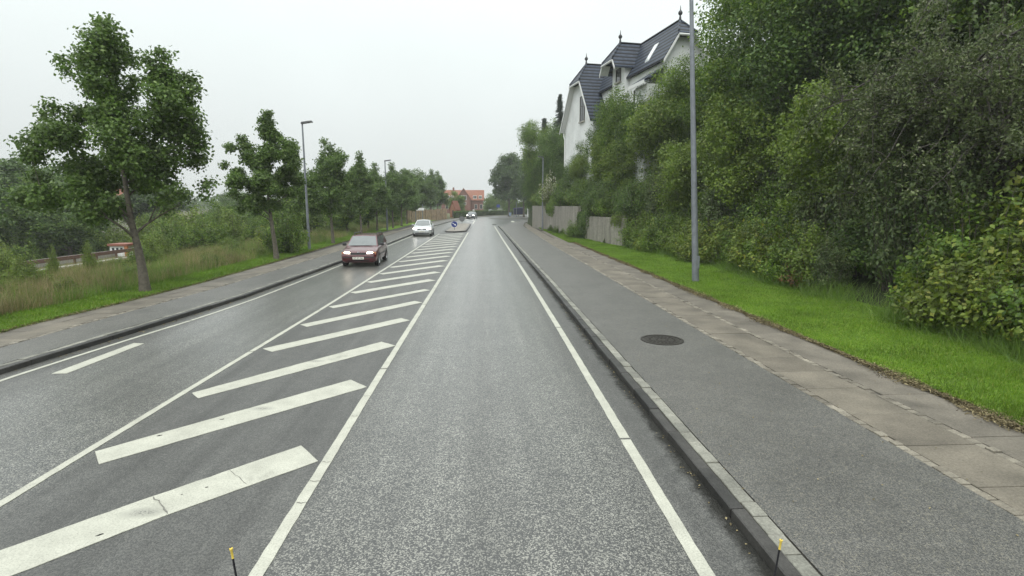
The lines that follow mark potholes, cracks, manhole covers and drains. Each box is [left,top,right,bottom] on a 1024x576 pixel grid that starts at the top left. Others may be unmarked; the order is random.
manhole cover [640,334,684,345]
